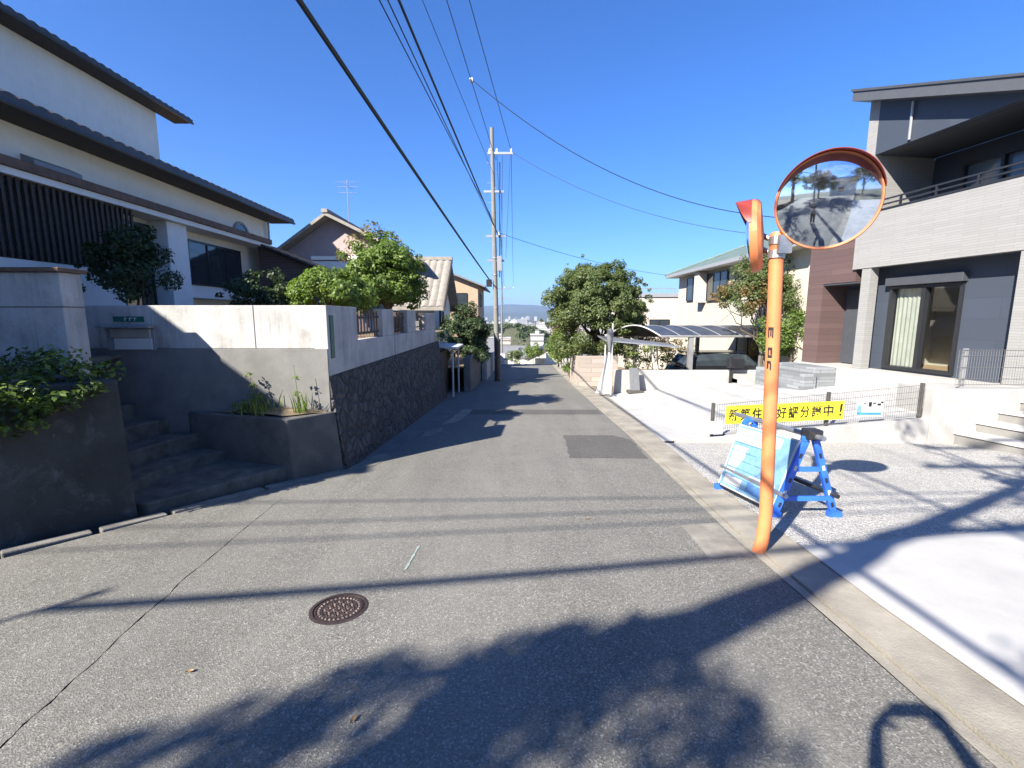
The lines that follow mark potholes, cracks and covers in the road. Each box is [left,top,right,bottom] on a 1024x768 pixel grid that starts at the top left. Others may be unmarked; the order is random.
crack [0,499,281,749]
manhole cover [308,593,369,625]
